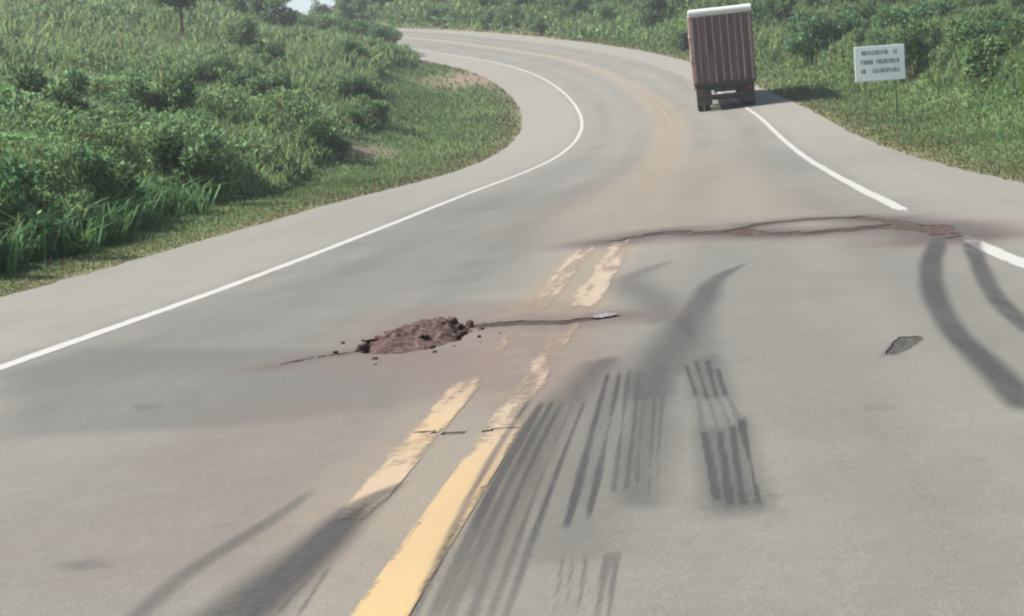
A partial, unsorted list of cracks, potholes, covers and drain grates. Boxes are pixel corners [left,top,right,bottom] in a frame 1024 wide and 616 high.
crack [608,216,964,242]
crack [280,315,621,365]
pothole [332,316,501,365]
pothole [885,336,924,355]
